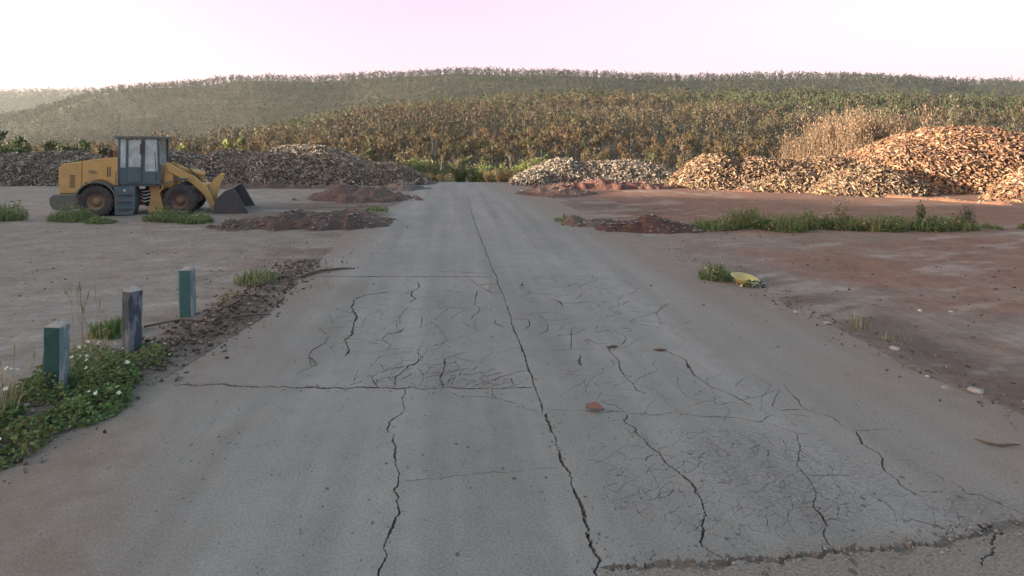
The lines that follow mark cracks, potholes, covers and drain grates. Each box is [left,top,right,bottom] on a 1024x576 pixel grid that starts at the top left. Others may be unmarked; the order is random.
crack [173,197,1024,576]
